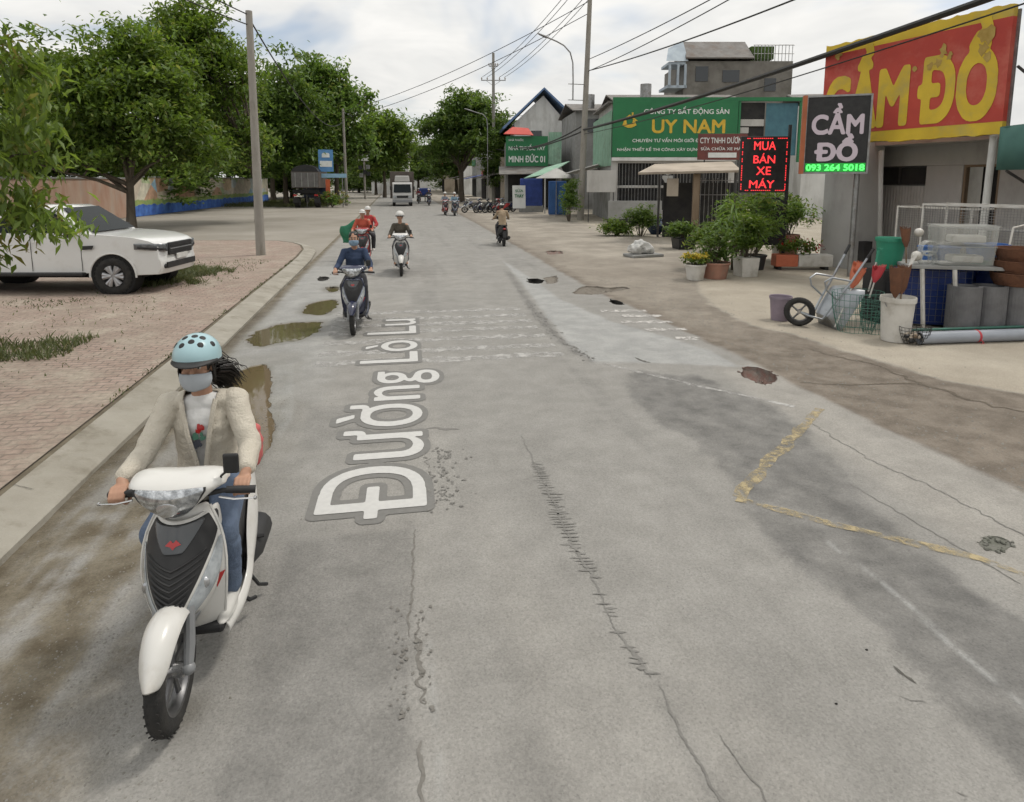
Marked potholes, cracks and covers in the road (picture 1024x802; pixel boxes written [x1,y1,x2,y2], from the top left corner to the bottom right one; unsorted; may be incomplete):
crack [852,485,1022,585]
pothole [737,366,779,385]
crack [522,437,767,802]
pothole [977,535,1016,554]
crack [796,348,1024,412]
crack [809,421,1024,535]
pothole [573,286,630,295]
crack [388,529,435,802]
